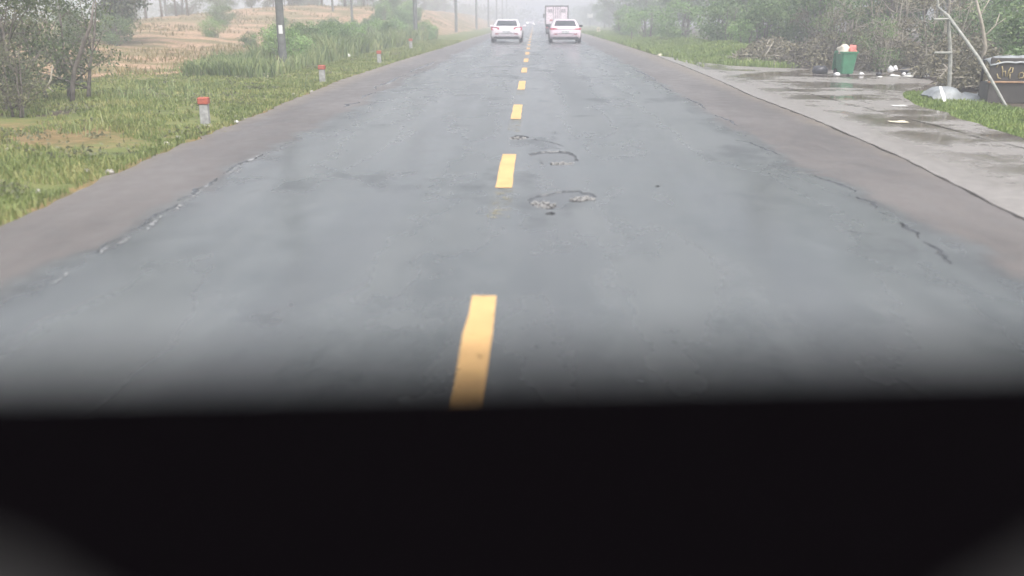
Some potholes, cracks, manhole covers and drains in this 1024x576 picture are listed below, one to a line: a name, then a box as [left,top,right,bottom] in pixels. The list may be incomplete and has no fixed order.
pothole [528,151,579,165]
crack [96,154,263,253]
crack [808,173,953,264]
pothole [528,190,597,210]
